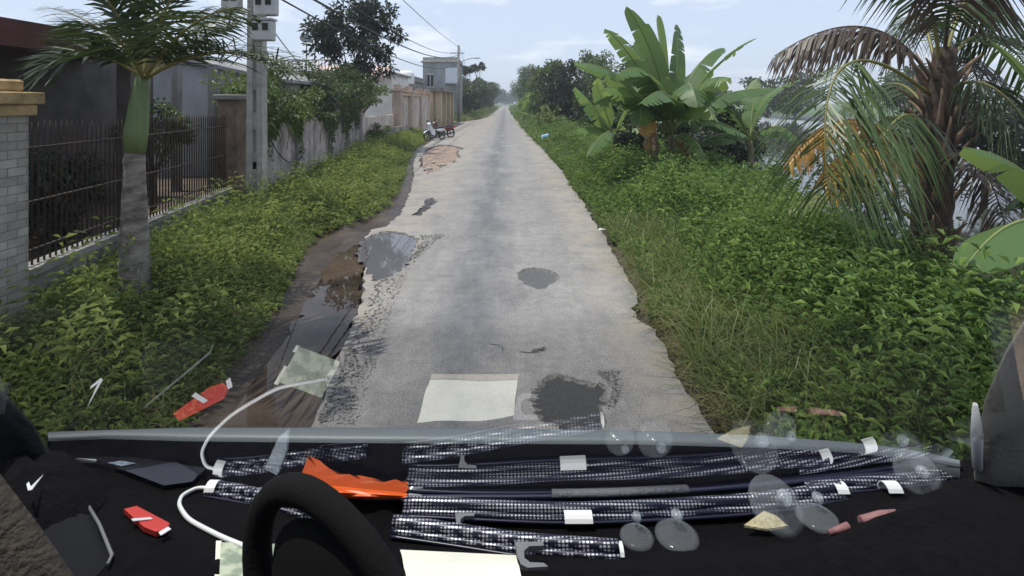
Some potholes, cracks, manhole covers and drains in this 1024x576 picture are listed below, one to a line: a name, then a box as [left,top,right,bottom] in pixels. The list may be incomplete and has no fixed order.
pothole [354,231,420,281]
pothole [517,267,560,289]
pothole [528,373,613,430]
pothole [412,198,439,216]
